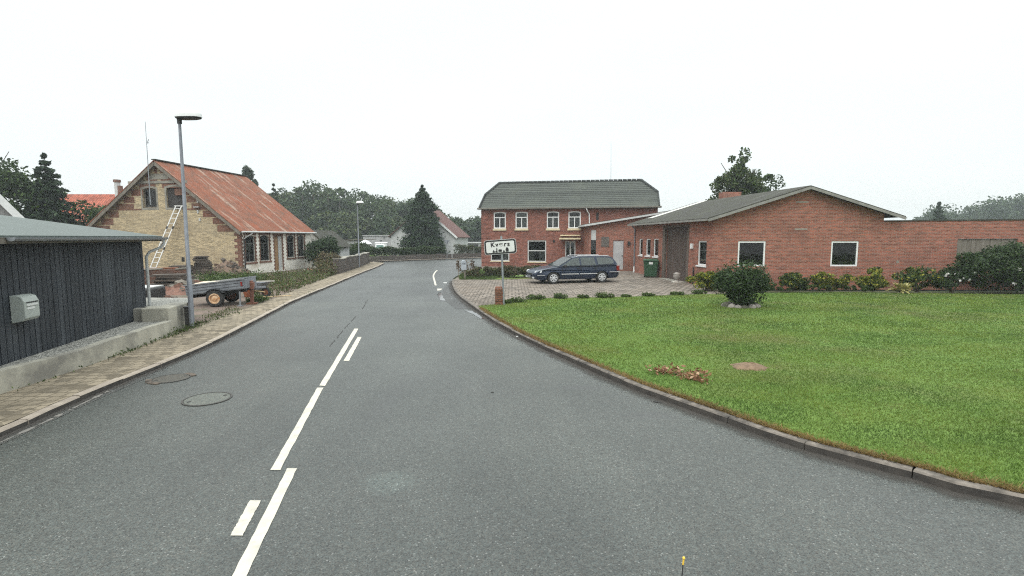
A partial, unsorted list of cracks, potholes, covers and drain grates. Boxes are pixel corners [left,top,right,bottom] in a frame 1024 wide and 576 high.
manhole cover [145,372,197,385]
manhole cover [181,392,233,406]
